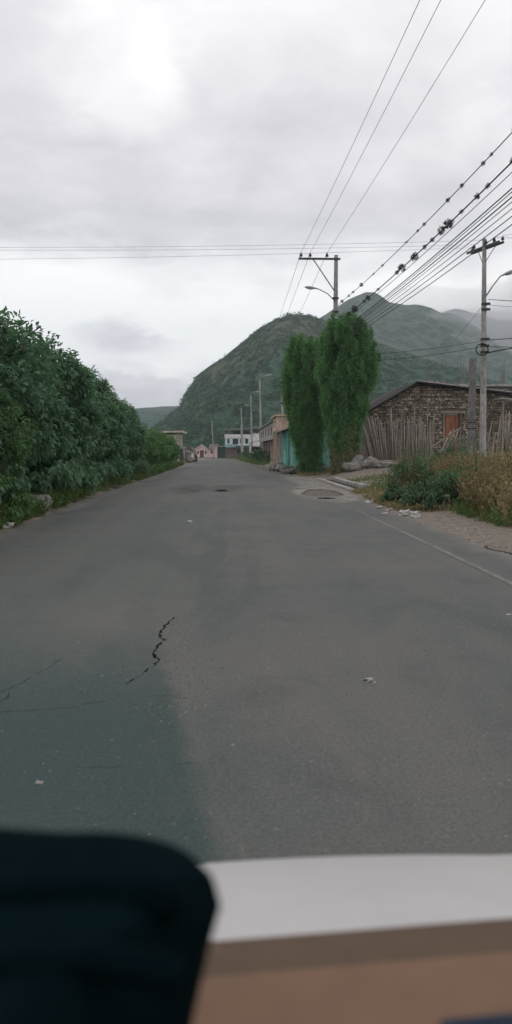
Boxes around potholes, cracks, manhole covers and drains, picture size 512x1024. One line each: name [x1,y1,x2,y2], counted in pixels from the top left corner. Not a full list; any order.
crack [0,659,105,713]
crack [126,617,174,684]
